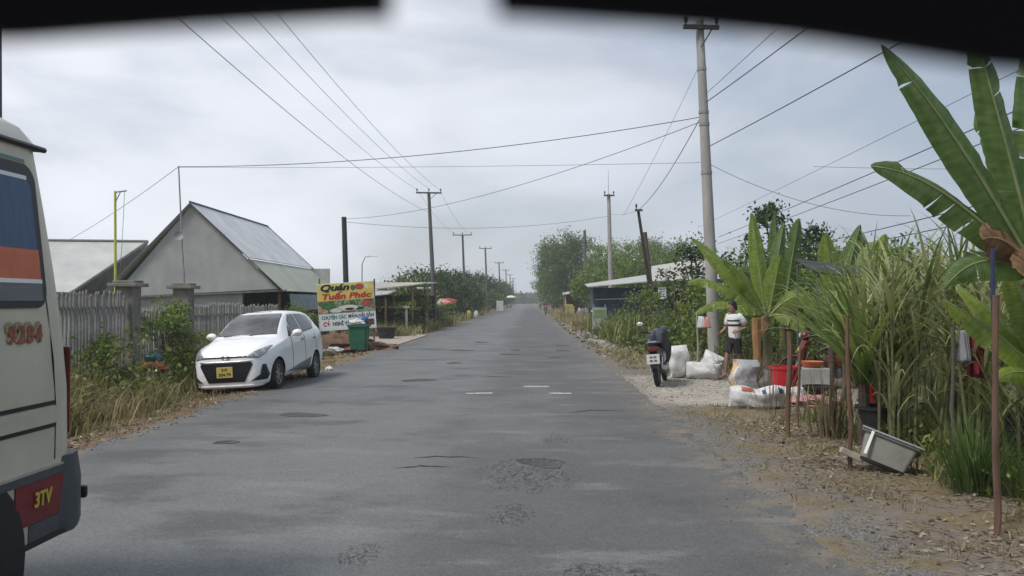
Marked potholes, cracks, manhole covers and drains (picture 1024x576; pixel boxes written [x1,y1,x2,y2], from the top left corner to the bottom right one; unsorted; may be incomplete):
crack [399,456,583,525]
pothole [517,458,565,468]
